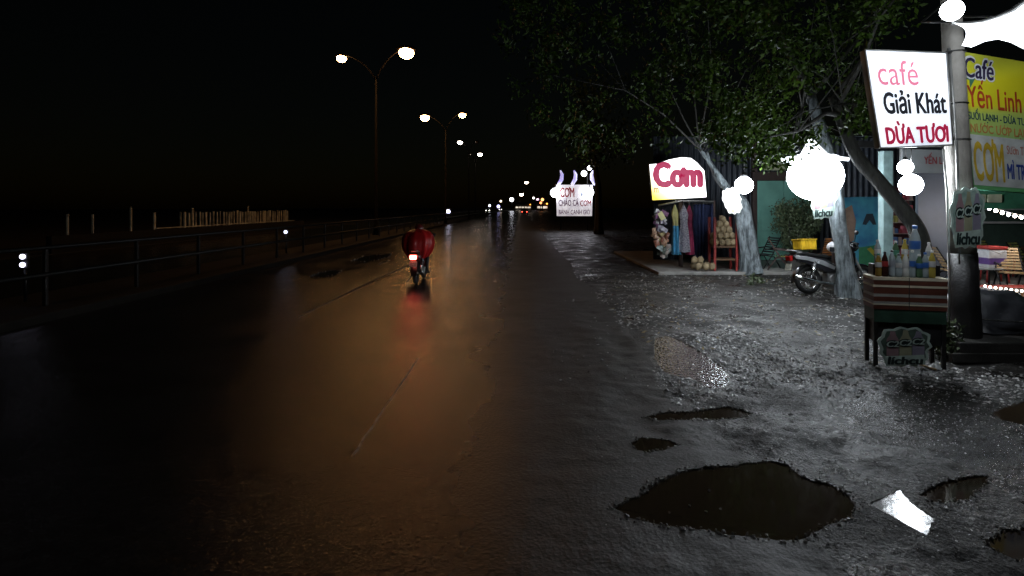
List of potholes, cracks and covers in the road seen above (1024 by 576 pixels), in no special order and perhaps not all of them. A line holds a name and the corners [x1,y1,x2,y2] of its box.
pothole [641,404,756,422]
pothole [607,457,864,544]
pothole [919,474,995,505]
pothole [628,436,681,453]
